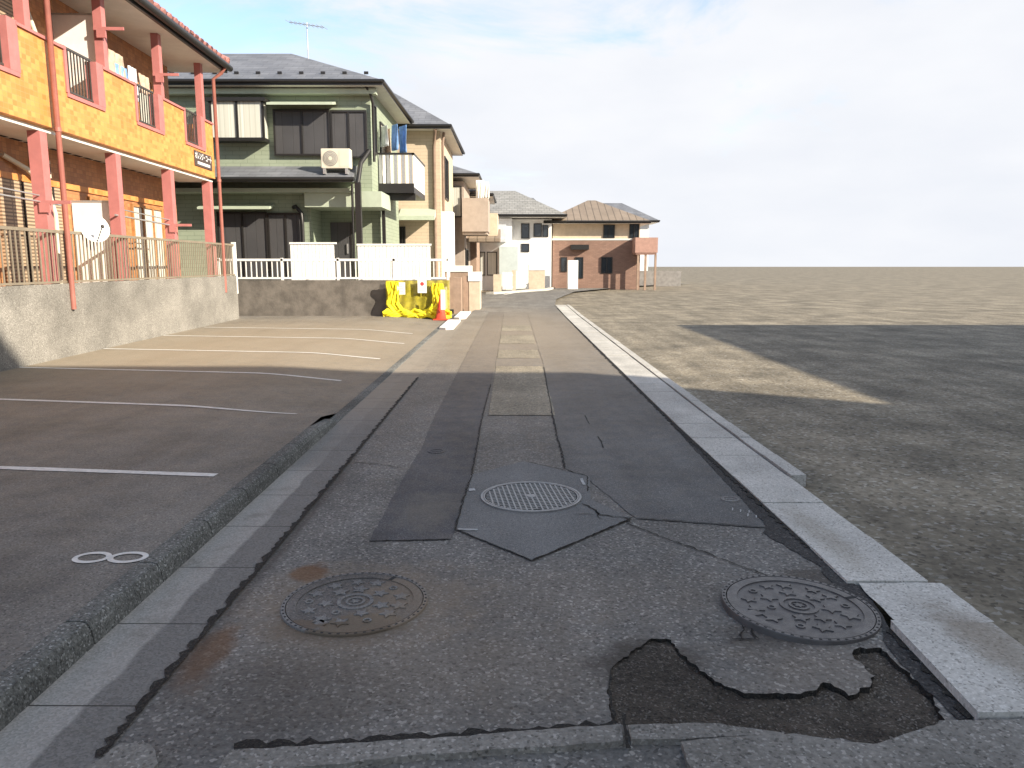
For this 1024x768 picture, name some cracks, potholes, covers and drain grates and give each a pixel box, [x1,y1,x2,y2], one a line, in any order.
manhole cover [721,575,882,646]
crack [559,310,974,718]
pothole [607,638,945,744]
manhole cover [280,572,428,637]
